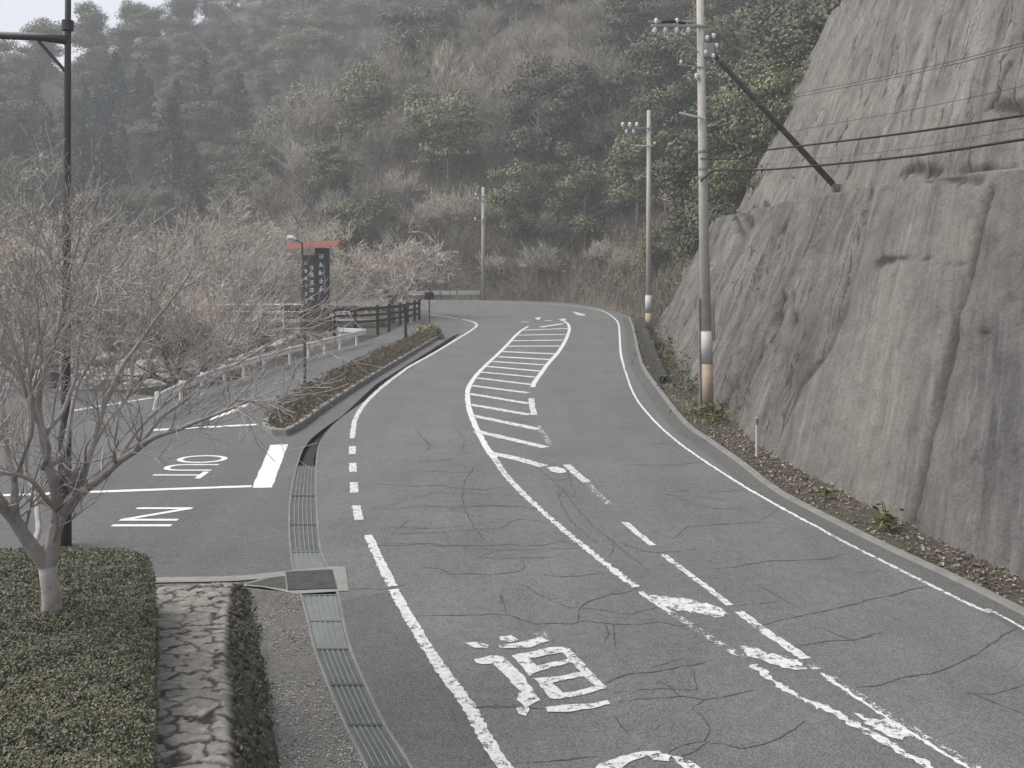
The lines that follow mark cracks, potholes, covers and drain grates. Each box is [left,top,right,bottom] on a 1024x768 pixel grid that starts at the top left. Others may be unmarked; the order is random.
drain grate [316,648,363,685]
drain grate [302,594,341,621]
crack [350,424,786,648]
crack [971,685,1023,714]
drain grate [290,496,316,525]
drain grate [291,465,315,496]
drain grate [347,724,408,768]
drain grate [292,552,326,570]
drain grate [290,525,319,552]
crack [853,625,1024,689]
drain grate [309,620,348,649]
